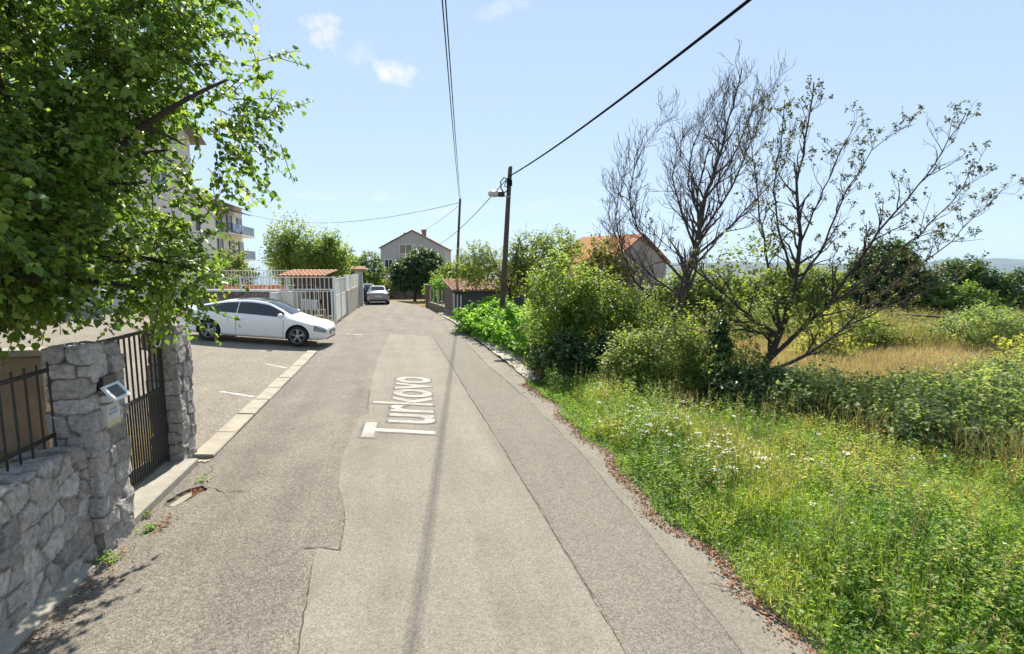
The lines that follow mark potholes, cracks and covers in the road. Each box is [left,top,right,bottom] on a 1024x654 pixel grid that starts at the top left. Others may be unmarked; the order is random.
pothole [164,485,208,507]
